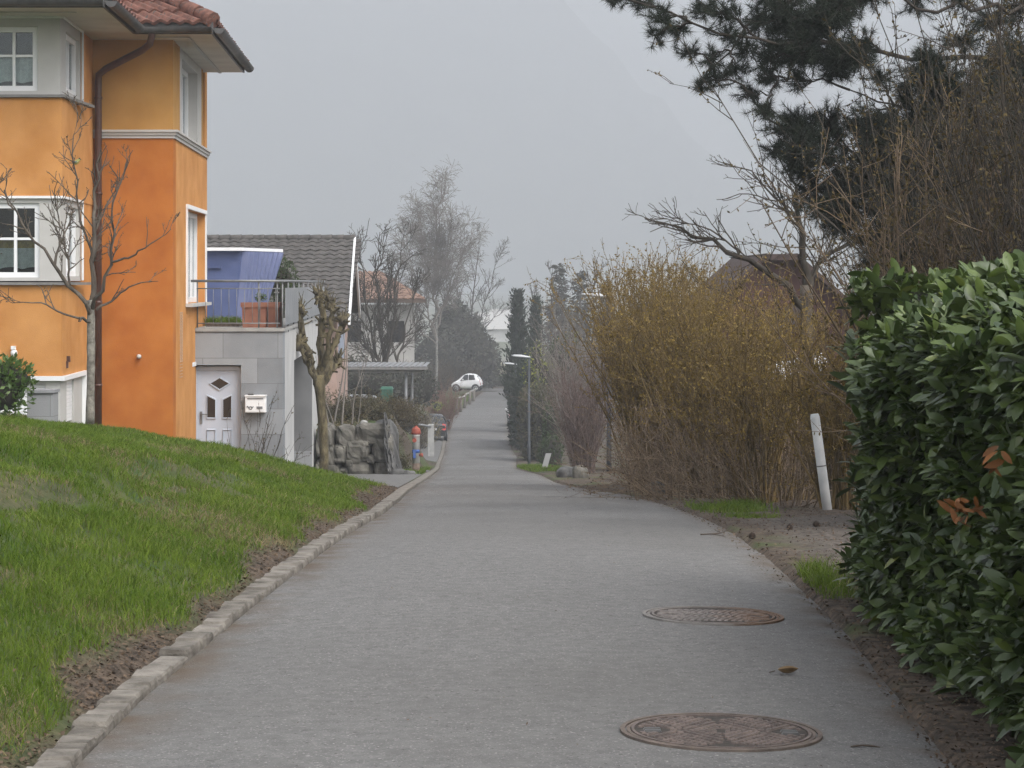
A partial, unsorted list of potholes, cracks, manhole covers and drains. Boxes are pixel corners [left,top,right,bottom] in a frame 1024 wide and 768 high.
manhole cover [620,712,823,752]
manhole cover [643,606,784,626]
